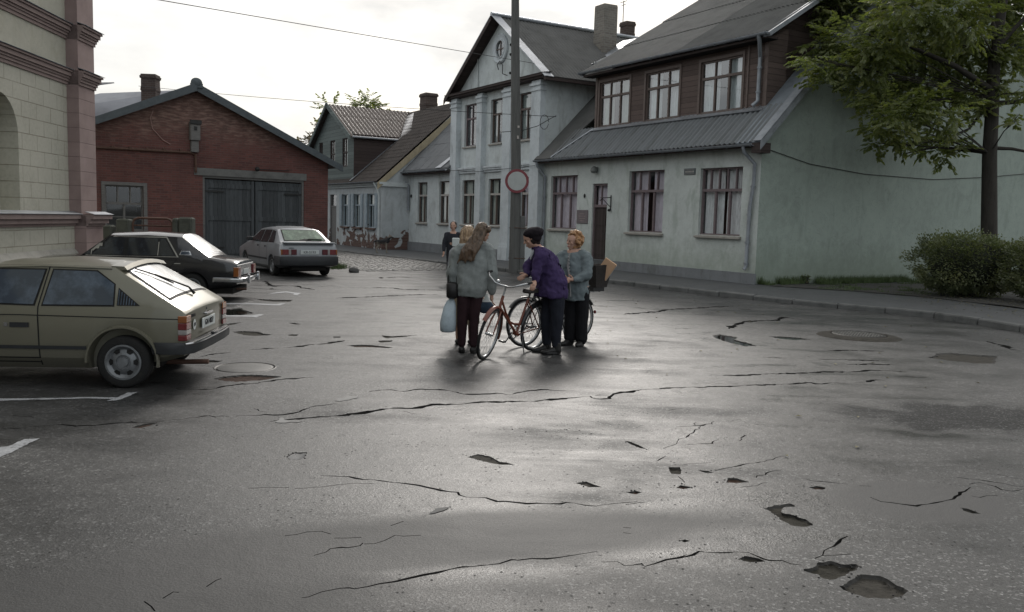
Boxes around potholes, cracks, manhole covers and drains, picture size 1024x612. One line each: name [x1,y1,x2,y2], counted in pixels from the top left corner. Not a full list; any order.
crack [9,350,911,429]
manhole cover [816,330,903,342]
crack [302,551,601,598]
crack [657,408,782,487]
pothole [804,560,862,584]
crack [627,306,802,329]
pothole [469,454,514,465]
crack [261,475,644,506]
pothole [840,573,914,600]
crack [871,474,1023,507]
pothole [764,503,813,527]
manhole cover [213,362,277,373]
